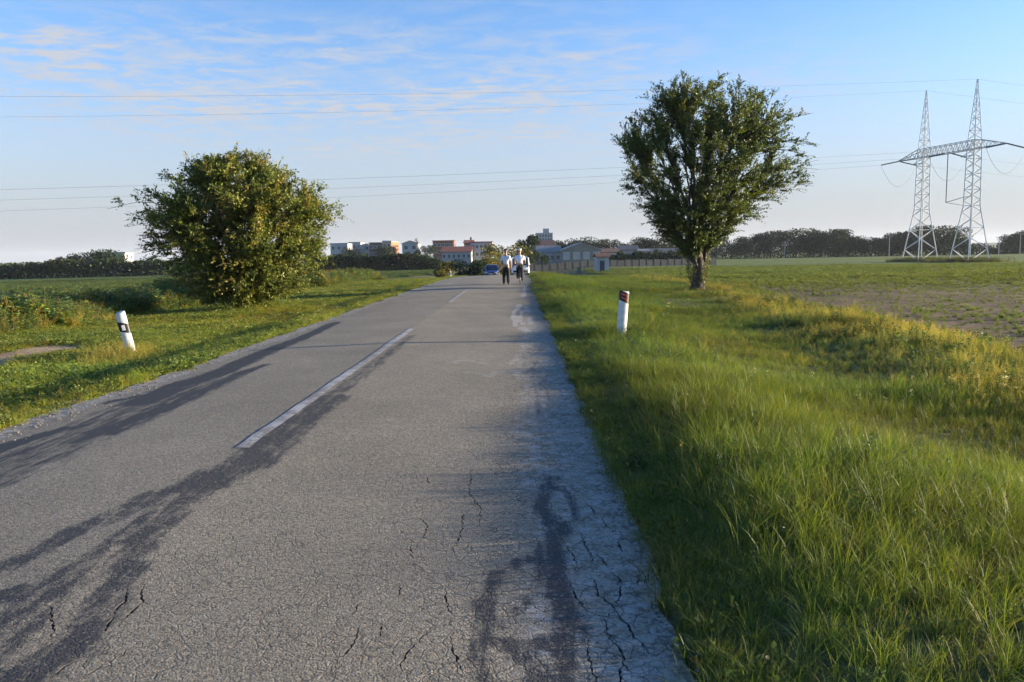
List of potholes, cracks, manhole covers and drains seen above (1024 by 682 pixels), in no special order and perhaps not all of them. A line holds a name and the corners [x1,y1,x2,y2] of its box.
crack [45,583,145,680]
crack [452,471,482,561]
crack [450,630,464,678]
crack [399,587,450,676]
crack [567,501,649,682]
